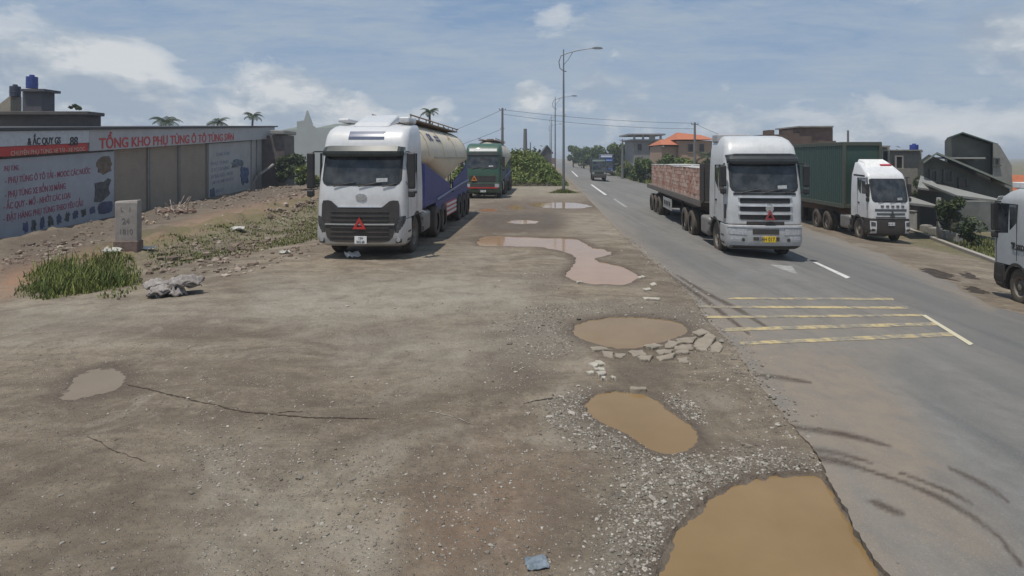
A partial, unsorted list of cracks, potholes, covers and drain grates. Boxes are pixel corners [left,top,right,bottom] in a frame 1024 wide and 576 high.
pothole [58,367,127,400]
pothole [476,235,640,285]
pothole [582,390,700,454]
crack [126,384,372,419]
pothole [572,316,689,349]
pothole [655,471,883,576]
